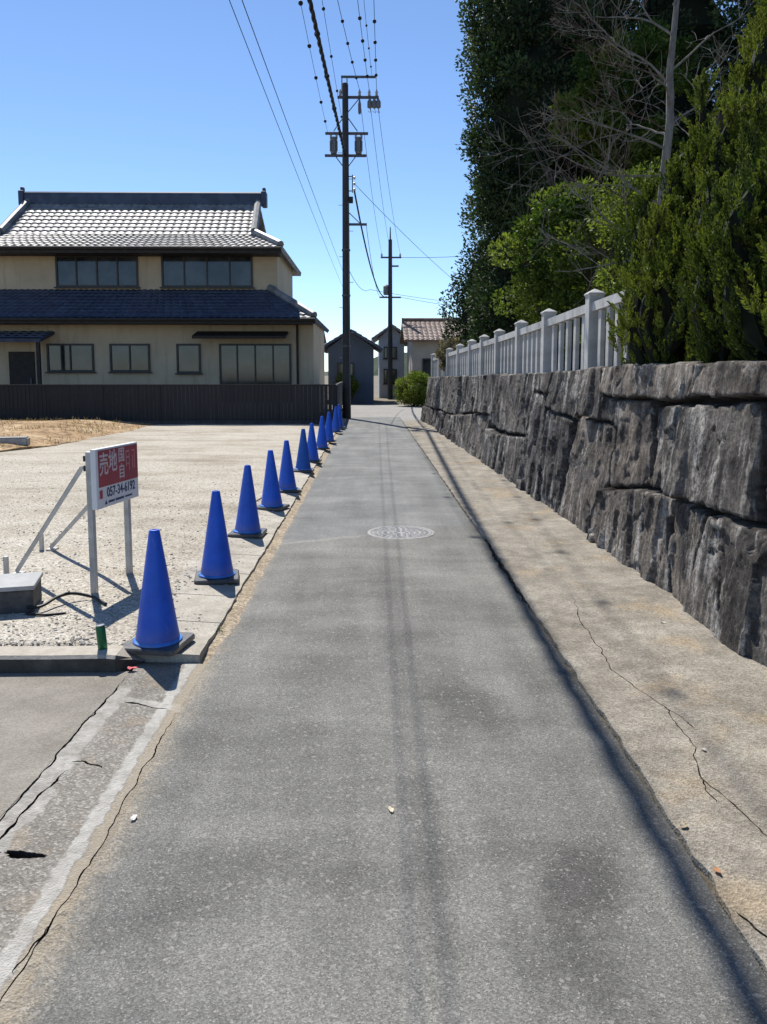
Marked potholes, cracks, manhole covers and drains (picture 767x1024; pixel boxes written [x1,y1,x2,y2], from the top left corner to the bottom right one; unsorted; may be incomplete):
crack [0,701,174,1002]
pothole [5,850,46,859]
crack [572,597,767,836]
manhole cover [367,526,435,539]
crack [736,912,767,938]
